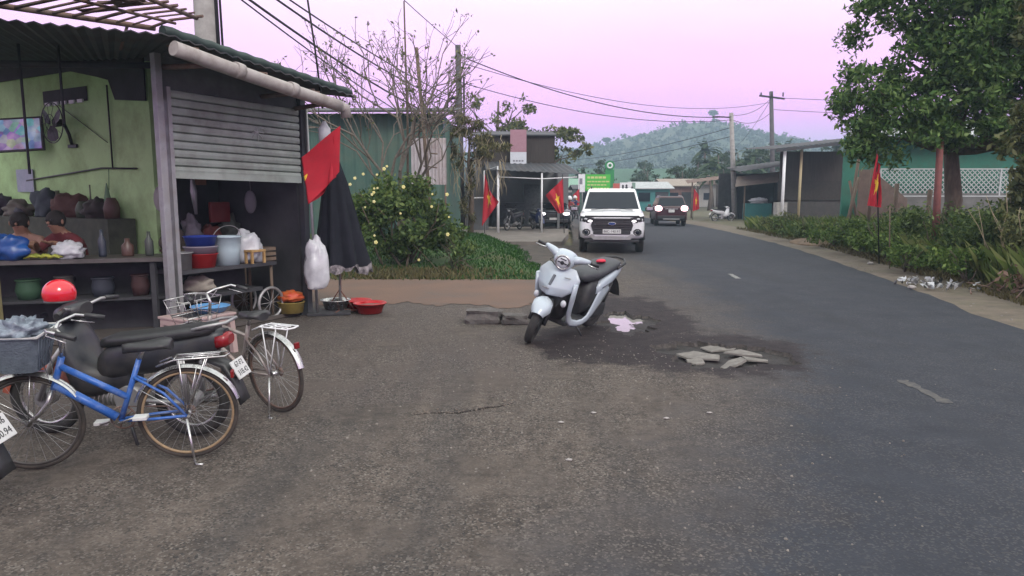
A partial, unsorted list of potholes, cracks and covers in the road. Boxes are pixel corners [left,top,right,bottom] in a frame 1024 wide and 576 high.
crack [412,399,514,415]
pothole [596,311,662,336]
pothole [650,341,801,369]
